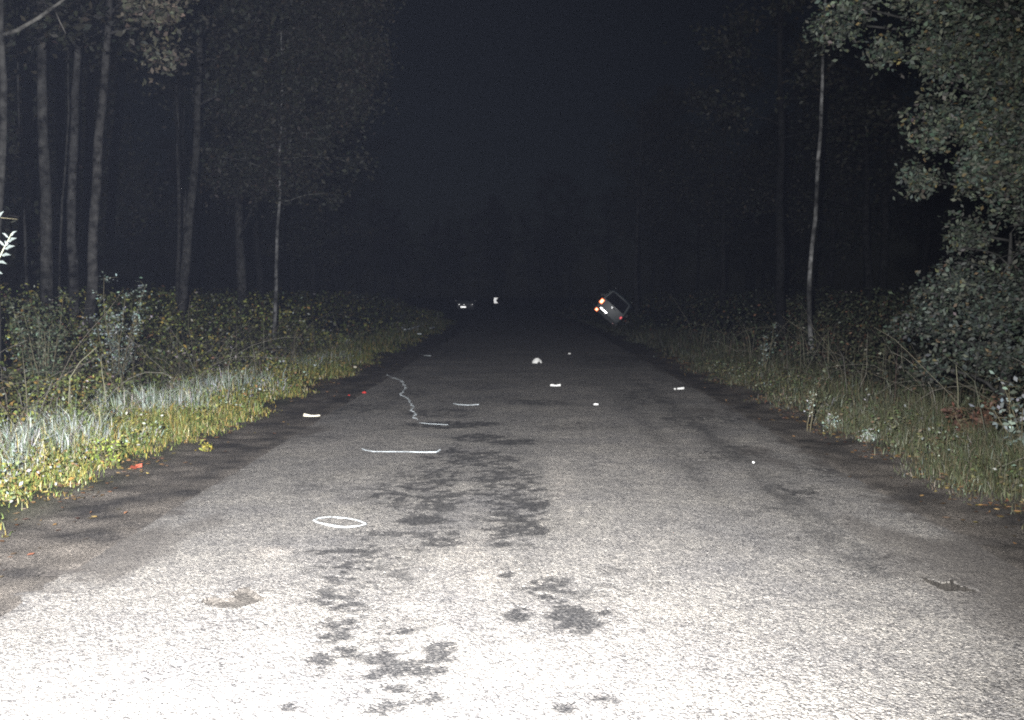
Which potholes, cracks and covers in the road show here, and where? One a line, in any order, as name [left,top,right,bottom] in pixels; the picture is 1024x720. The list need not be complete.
pothole [198,586,268,608]
pothole [918,577,979,593]
